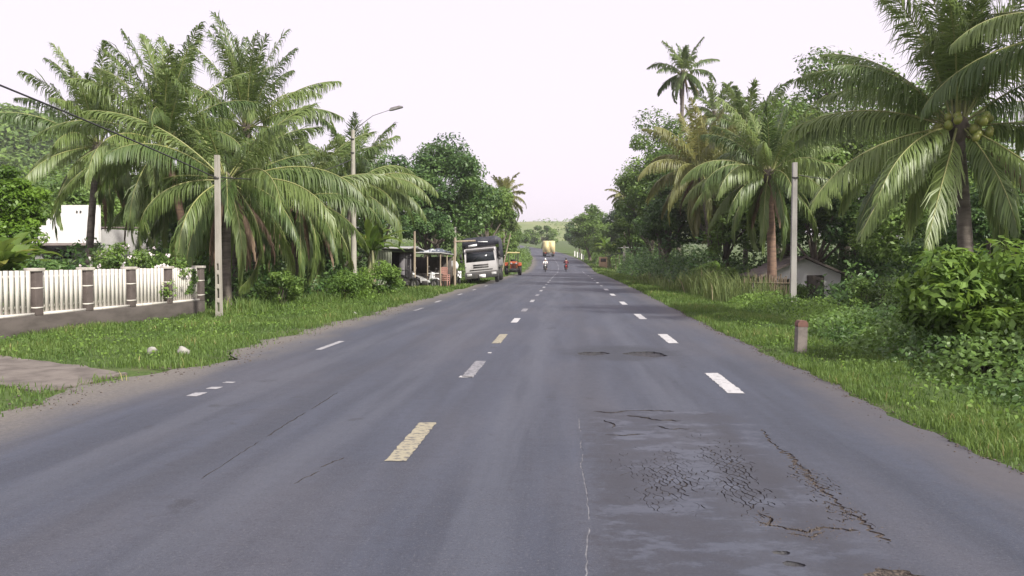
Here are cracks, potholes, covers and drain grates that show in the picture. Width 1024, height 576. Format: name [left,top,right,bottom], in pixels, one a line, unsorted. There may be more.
pothole [863,567,922,576]
crack [610,446,726,517]
crack [579,410,682,576]
crack [690,429,891,543]
